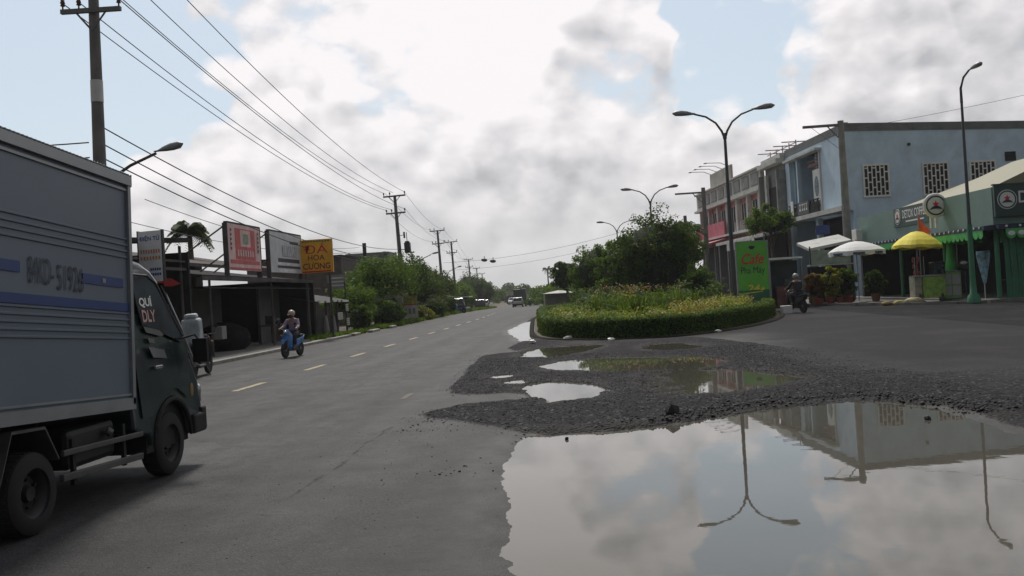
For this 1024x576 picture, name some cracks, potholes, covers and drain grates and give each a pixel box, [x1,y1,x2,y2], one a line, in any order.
pothole [511,379,621,404]
pothole [634,341,714,351]
pothole [529,354,737,372]
pothole [630,366,824,397]
pothole [511,342,613,358]
pothole [452,394,1024,576]
crack [276,413,416,503]
